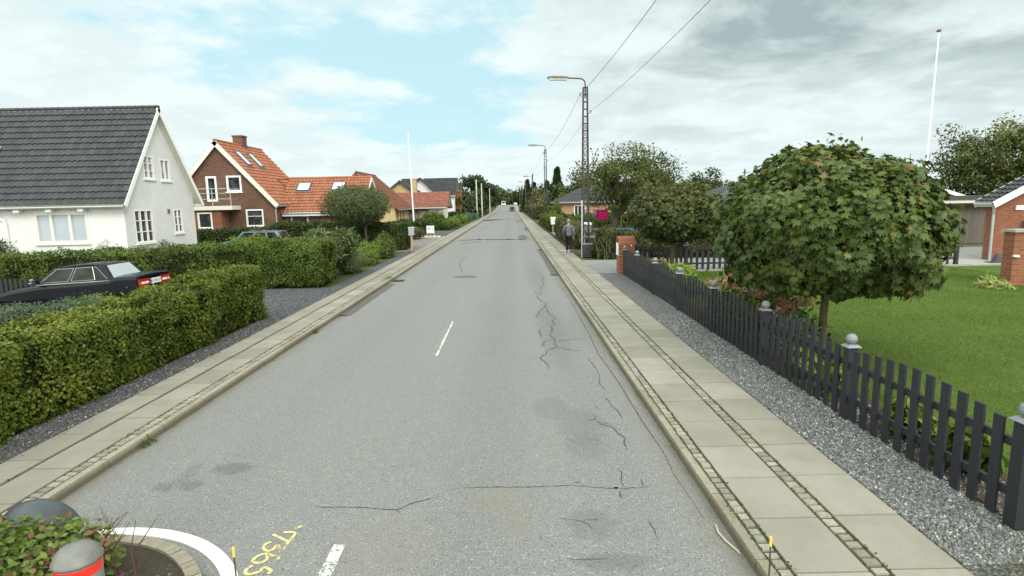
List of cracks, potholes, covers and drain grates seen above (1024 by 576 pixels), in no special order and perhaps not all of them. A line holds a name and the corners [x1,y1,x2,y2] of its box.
crack [535,273,581,366]
crack [587,357,626,446]
crack [451,472,647,498]
